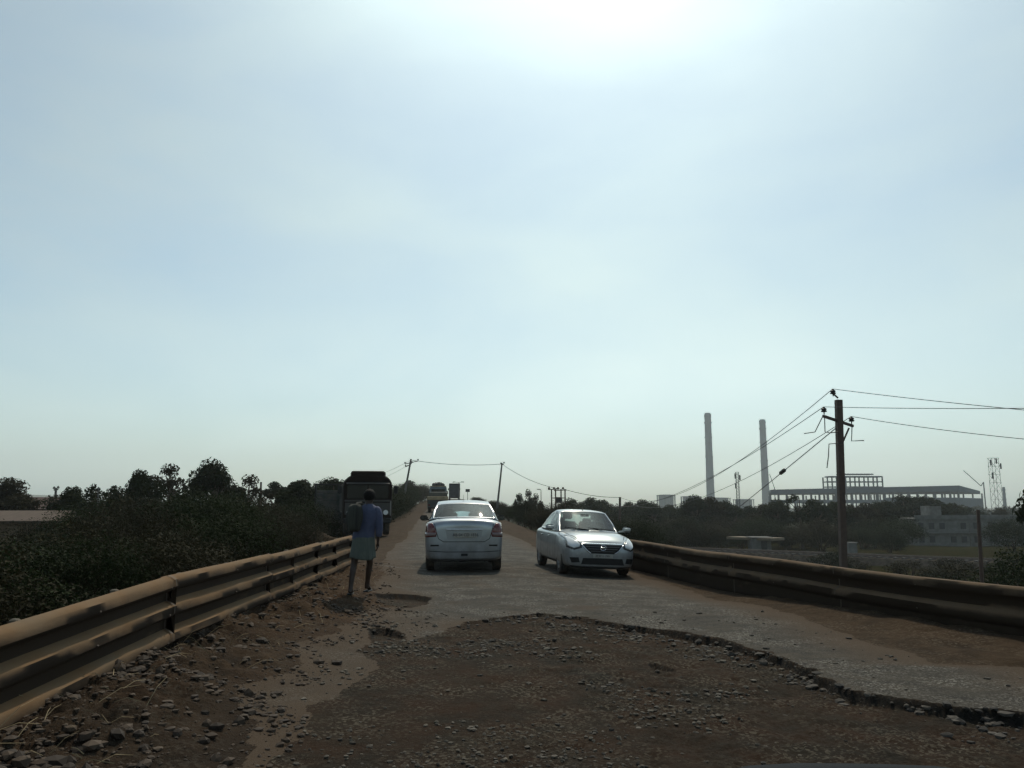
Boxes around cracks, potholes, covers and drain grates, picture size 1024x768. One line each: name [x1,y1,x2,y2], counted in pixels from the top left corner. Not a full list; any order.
pothole [265,613,1024,768]
pothole [373,593,432,608]
